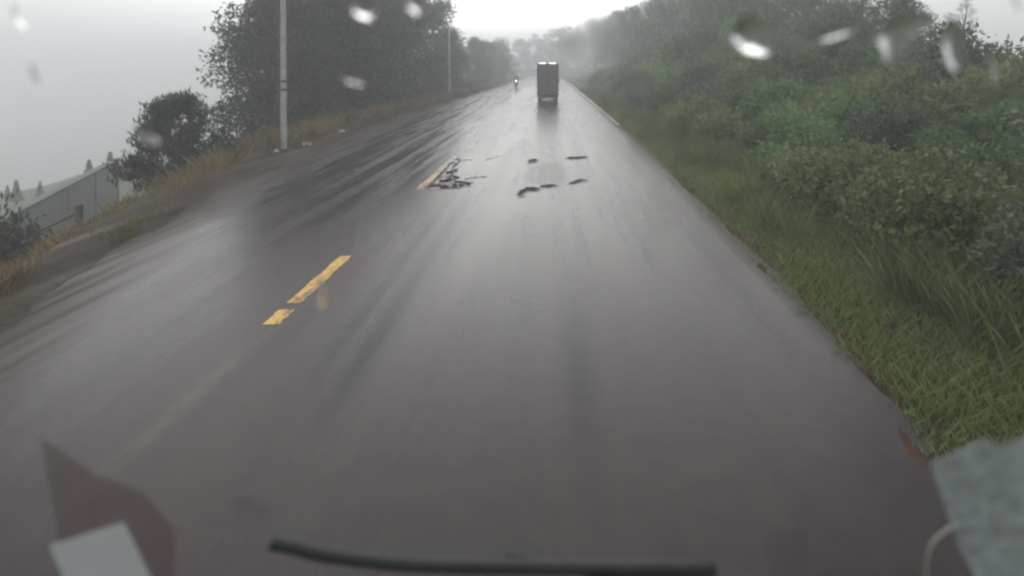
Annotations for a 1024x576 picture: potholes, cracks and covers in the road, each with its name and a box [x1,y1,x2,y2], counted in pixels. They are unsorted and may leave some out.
pothole [514,187,543,198]
pothole [423,158,473,191]
